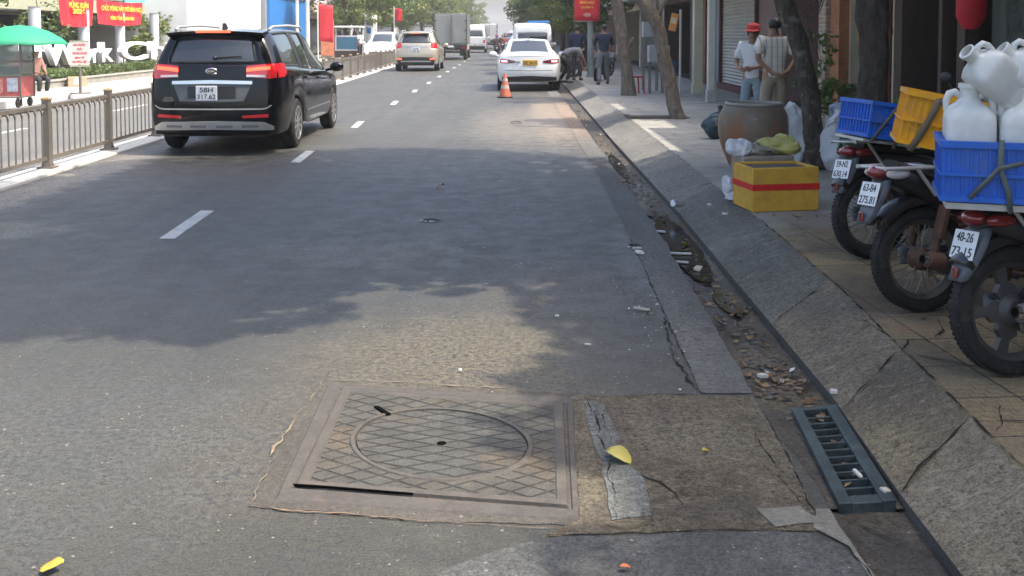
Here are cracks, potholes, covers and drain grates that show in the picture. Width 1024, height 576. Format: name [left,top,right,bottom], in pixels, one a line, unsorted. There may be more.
manhole cover [274,384,579,521]
drain grate [792,404,897,514]
crack [252,239,892,576]
